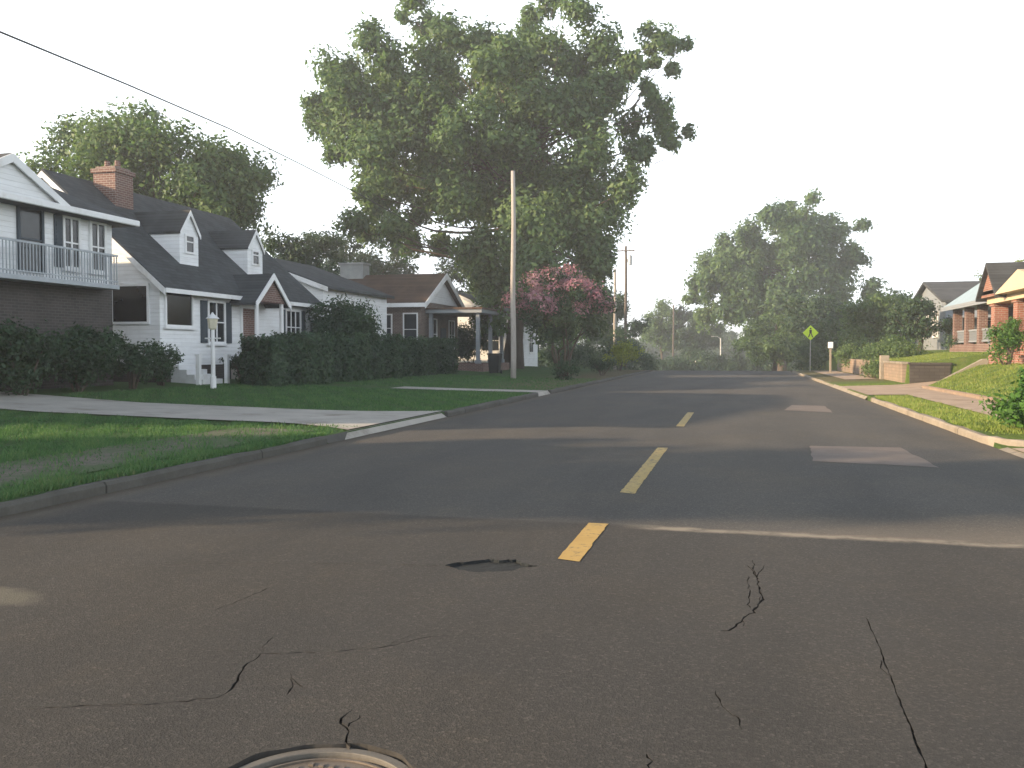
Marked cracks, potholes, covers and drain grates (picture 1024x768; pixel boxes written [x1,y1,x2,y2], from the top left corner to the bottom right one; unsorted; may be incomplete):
crack [866,618,928,768]
crack [721,560,765,631]
crack [339,710,361,749]
crack [43,629,453,708]
manhole cover [228,743,414,768]
crack [713,690,768,731]
pothole [445,559,536,572]
